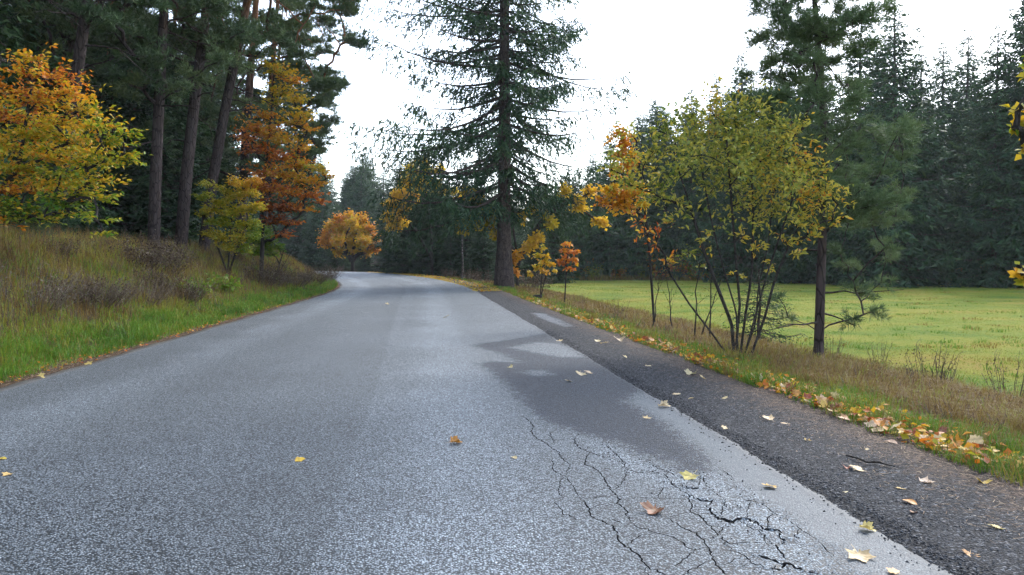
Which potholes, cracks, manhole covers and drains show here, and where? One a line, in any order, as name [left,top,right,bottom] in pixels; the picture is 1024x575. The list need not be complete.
crack [526,418,814,575]
